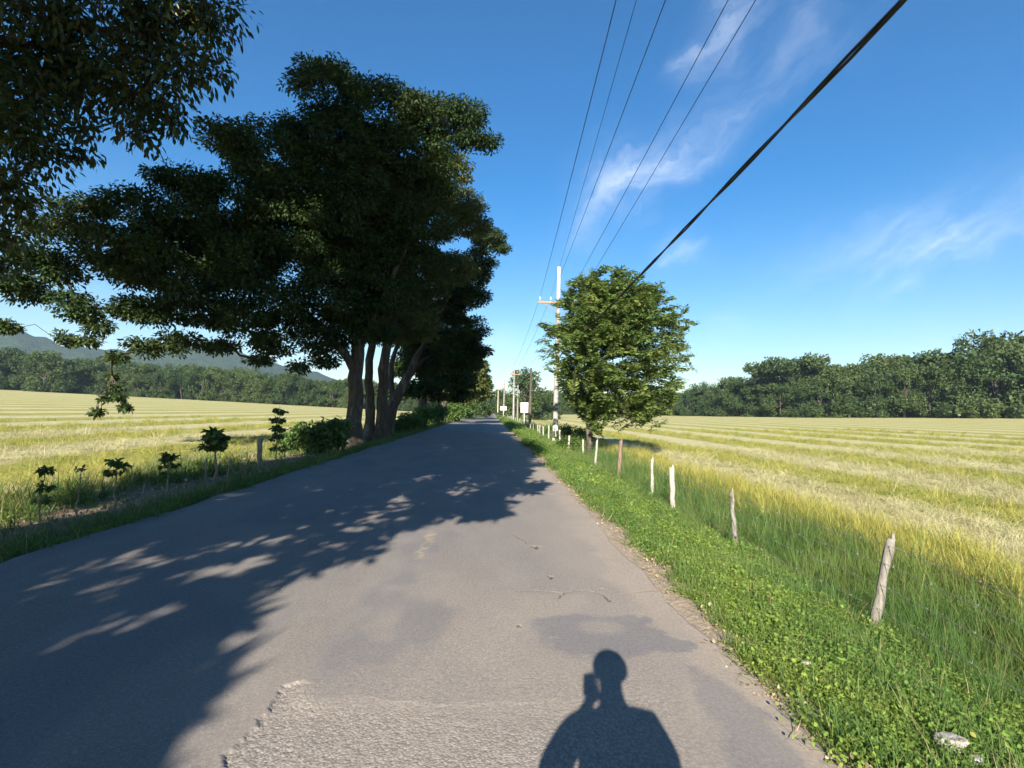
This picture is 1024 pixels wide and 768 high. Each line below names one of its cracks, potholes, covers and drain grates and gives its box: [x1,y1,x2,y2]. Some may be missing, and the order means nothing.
crack [509,533,533,545]
crack [509,586,619,604]
